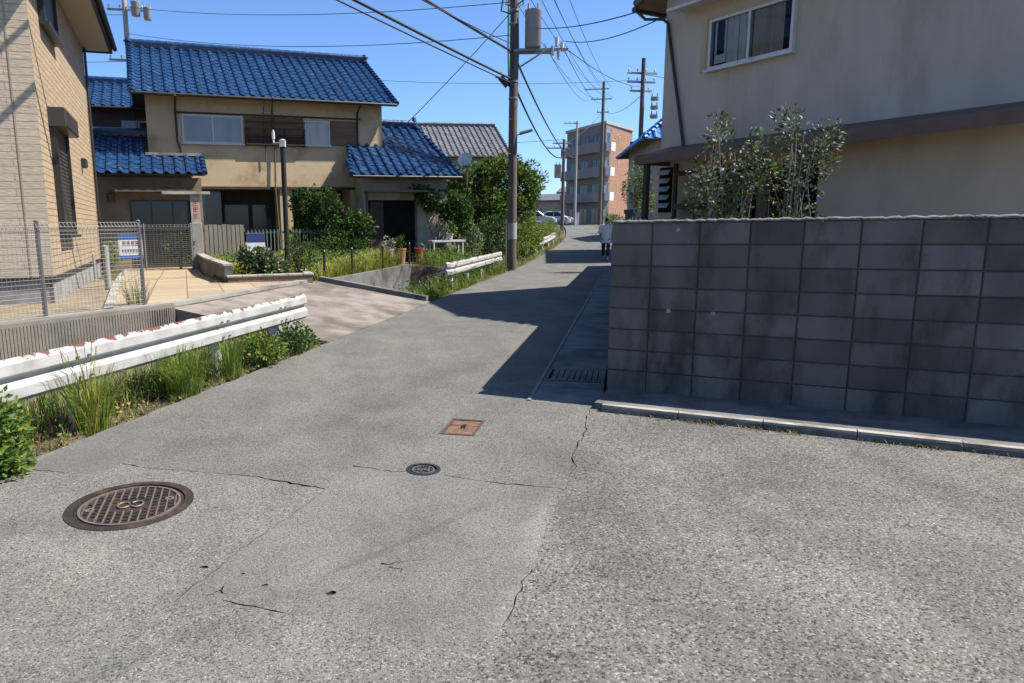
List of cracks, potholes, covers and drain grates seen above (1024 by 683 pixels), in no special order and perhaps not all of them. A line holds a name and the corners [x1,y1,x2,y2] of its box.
crack [503,569,532,625]
crack [446,475,562,489]
drain grate [543,368,606,385]
crack [206,587,286,614]
crack [122,463,325,489]
utility cover [406,463,441,476]
manhole cover [63,481,194,531]
